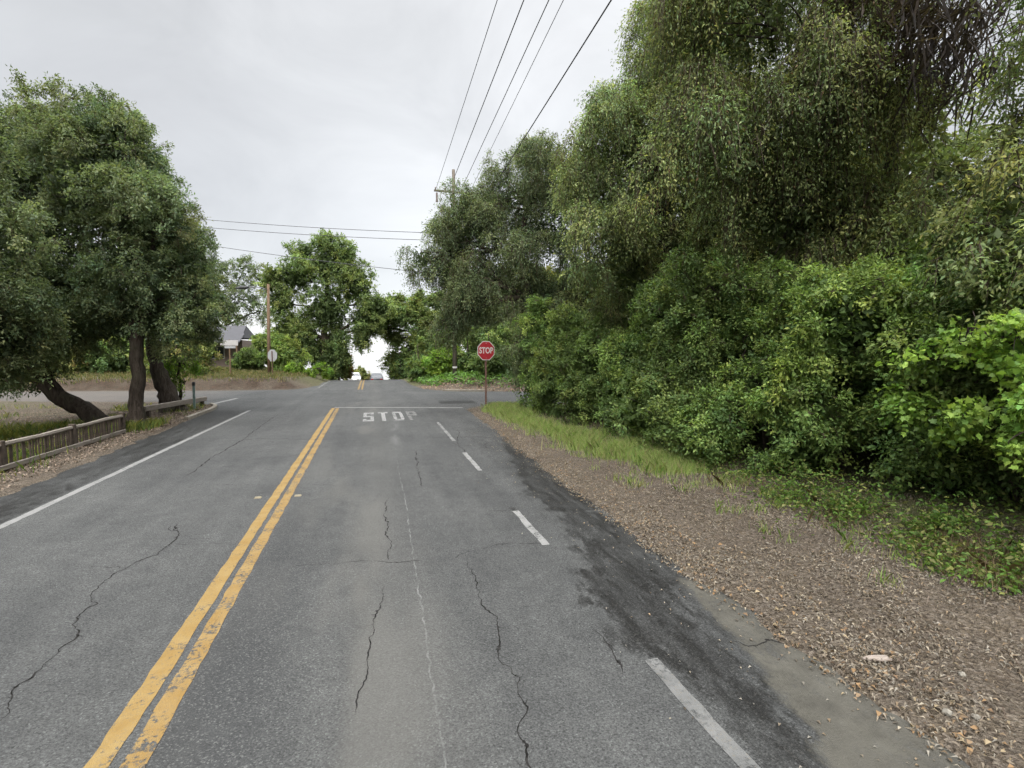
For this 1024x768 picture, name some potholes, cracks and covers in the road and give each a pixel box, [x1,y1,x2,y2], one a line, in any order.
crack [296,498,420,566]
crack [2,526,208,719]
crack [355,587,384,712]
crack [457,542,532,768]
crack [591,626,625,673]
